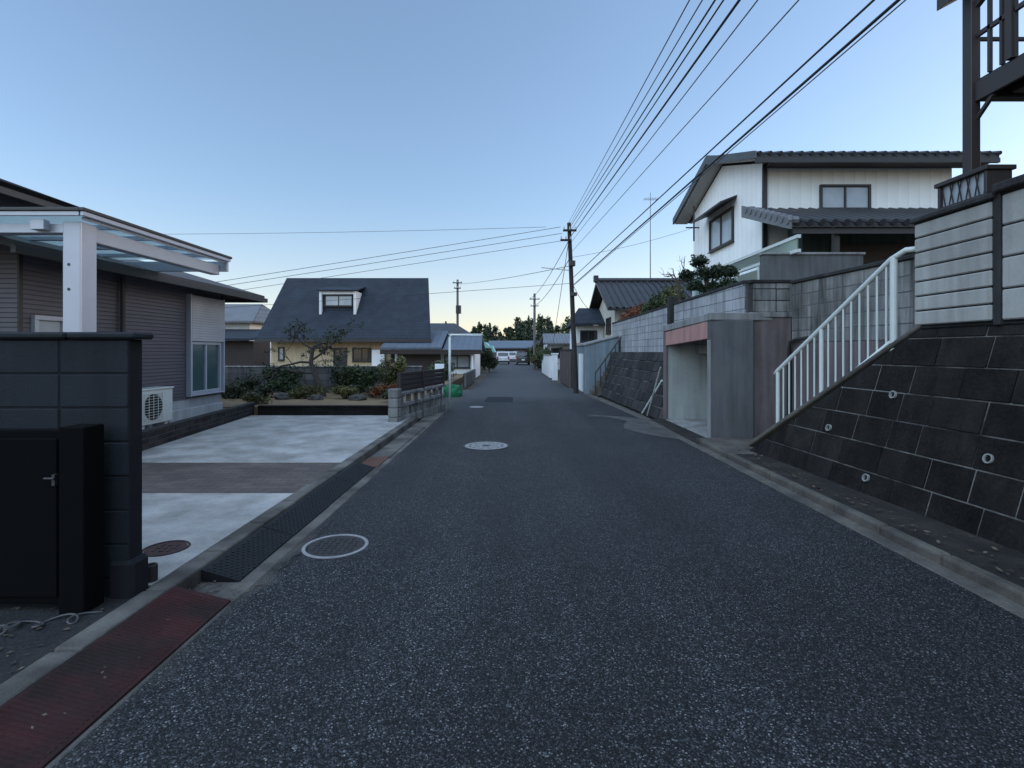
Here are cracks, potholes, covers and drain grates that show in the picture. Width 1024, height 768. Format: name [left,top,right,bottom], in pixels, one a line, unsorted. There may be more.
manhole cover [462,441,510,450]
manhole cover [301,534,369,559]
manhole cover [142,540,191,557]
